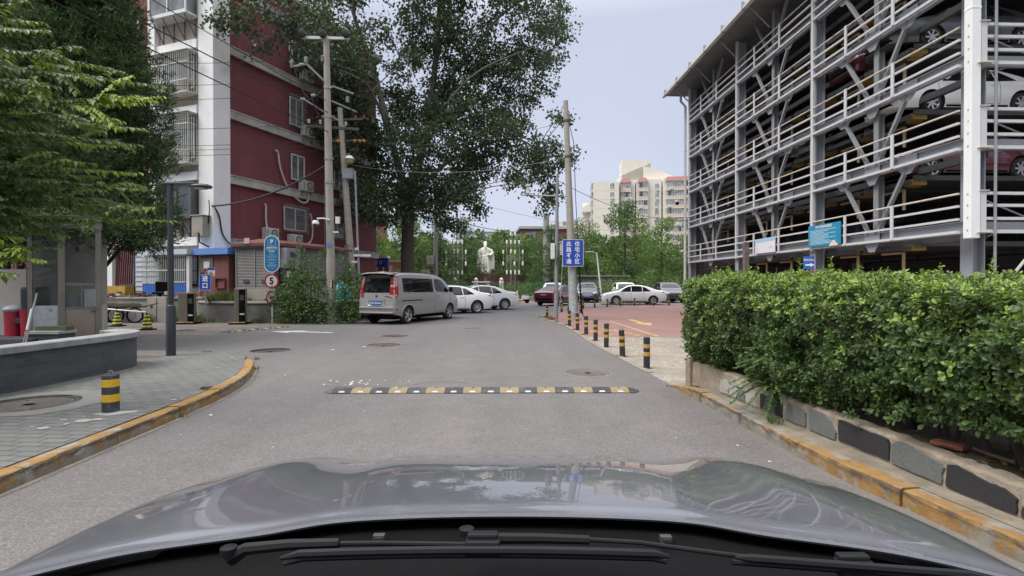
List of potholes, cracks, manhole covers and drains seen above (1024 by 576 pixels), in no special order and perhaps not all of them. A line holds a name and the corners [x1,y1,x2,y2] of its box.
manhole cover [0,395,82,413]
manhole cover [564,369,612,377]
